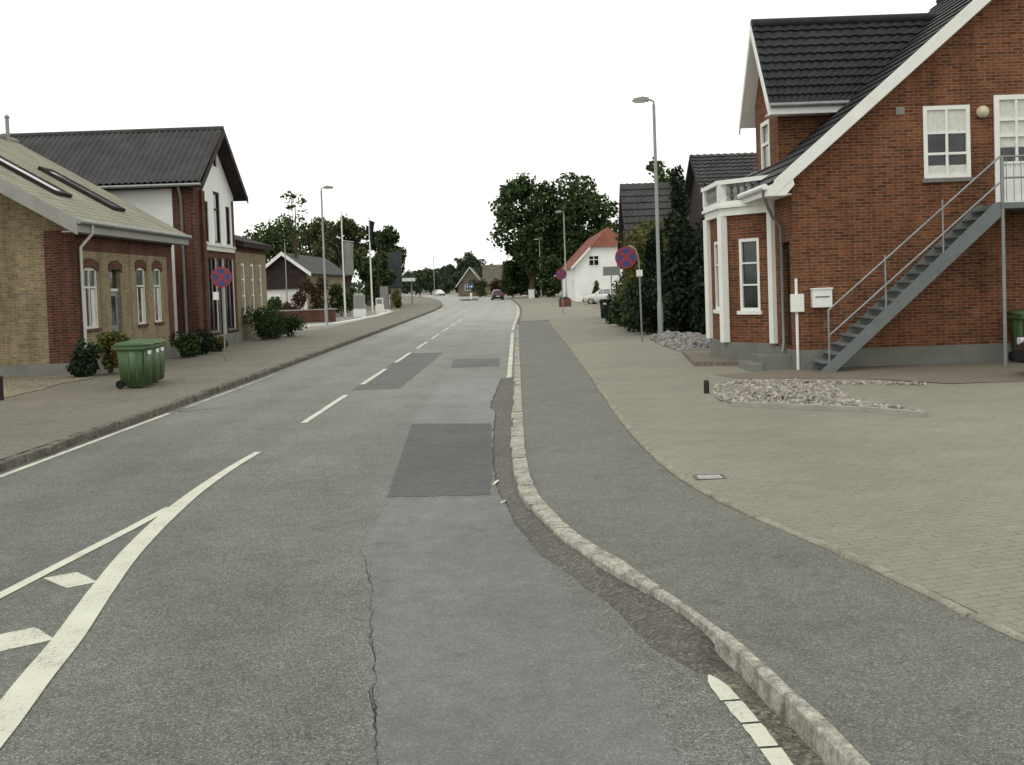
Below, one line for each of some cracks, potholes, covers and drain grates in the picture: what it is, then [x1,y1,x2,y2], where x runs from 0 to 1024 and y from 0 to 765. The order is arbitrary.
crack [360,543,379,765]
